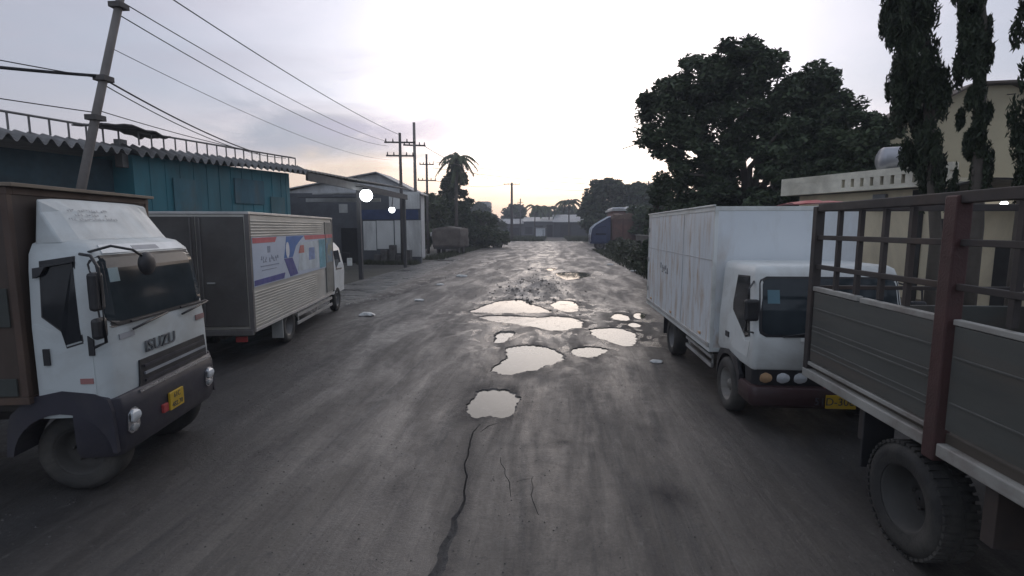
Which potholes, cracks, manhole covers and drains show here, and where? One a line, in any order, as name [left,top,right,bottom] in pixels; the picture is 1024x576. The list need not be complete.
pothole [479,315,585,331]
crack [500,458,539,515]
pothole [493,331,515,343]
pothole [589,327,638,346]
pothole [550,300,580,312]
pothole [610,313,630,321]
pothole [468,299,552,313]
pothole [490,344,566,375]
pothole [571,346,608,358]
pothole [555,272,591,280]
crack [428,423,497,576]
pothole [465,388,522,418]
